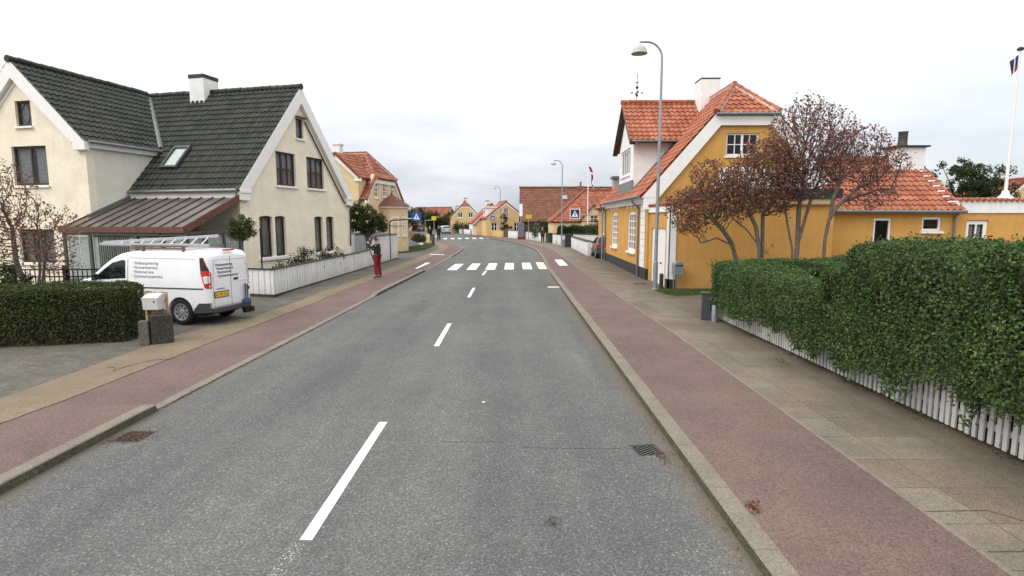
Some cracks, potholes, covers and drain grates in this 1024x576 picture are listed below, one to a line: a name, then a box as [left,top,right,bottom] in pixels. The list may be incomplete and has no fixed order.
drain grate [629,444,665,457]
pothole [545,515,561,529]
drain grate [112,431,156,442]
